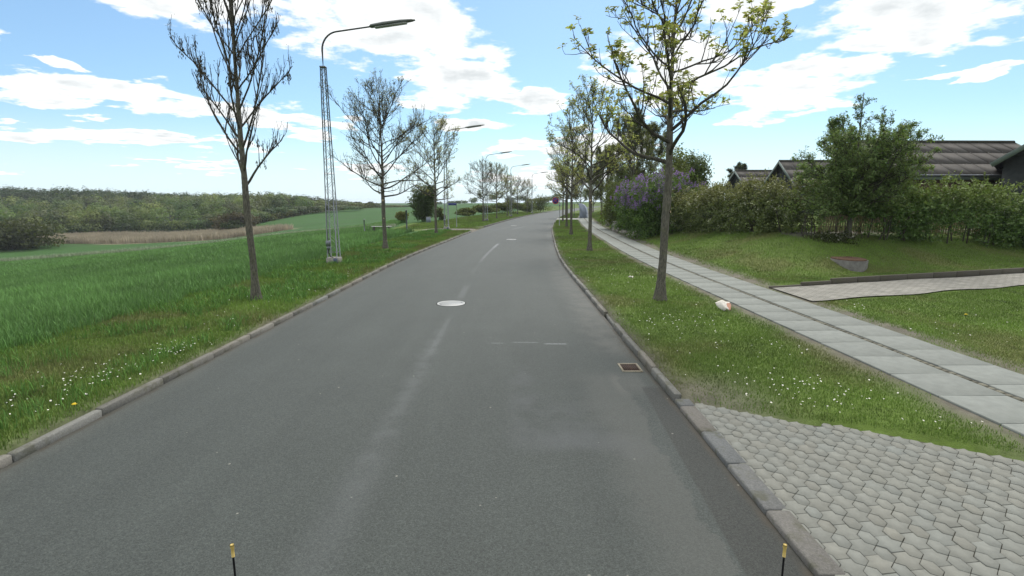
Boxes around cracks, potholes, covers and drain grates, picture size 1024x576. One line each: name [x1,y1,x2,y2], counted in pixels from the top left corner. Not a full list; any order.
drain grate [617,363,643,372]
